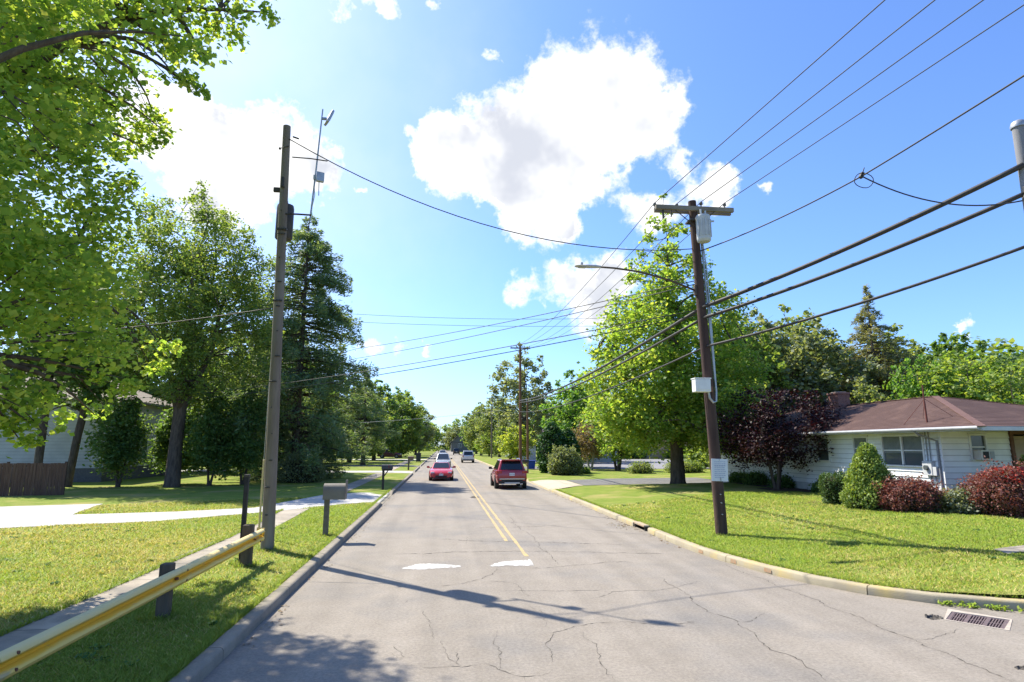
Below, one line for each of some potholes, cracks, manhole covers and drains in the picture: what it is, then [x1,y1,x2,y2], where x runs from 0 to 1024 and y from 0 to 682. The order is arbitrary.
drain grate [944,609,1012,631]
crack [412,525,824,682]
